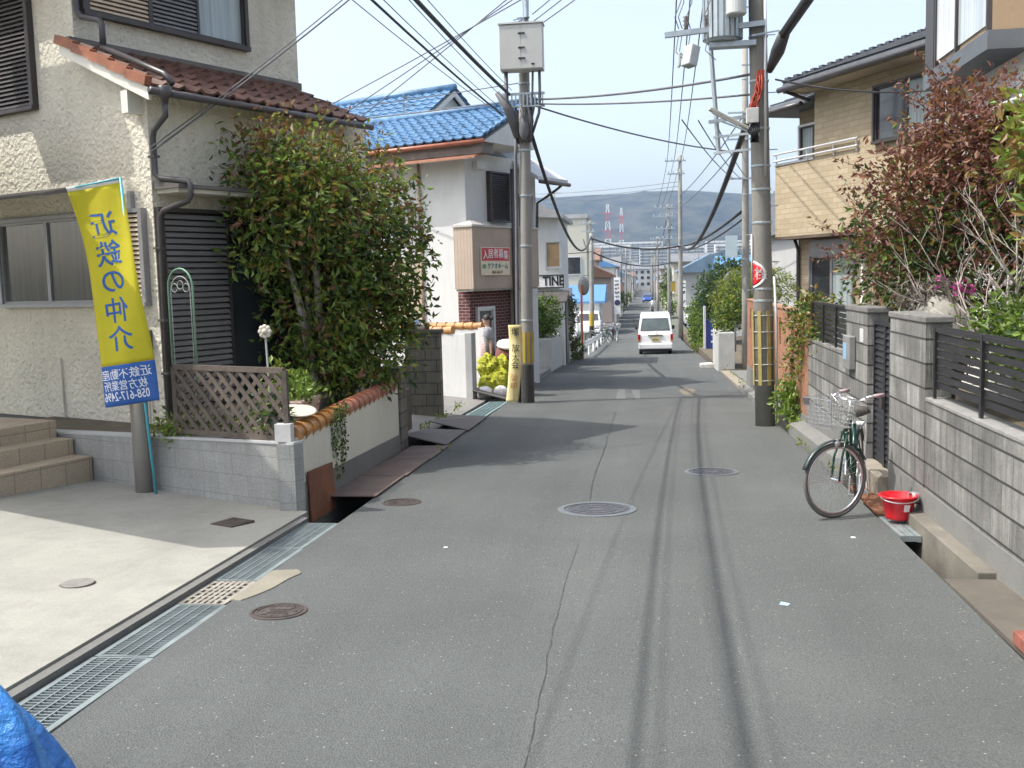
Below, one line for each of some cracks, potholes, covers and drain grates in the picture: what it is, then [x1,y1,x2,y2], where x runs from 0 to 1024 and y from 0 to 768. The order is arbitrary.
drain grate [467,402,508,418]
drain grate [18,657,153,734]
manhole cover [382,498,421,506]
manhole cover [249,603,308,620]
drain grate [213,548,302,581]
drain grate [94,604,227,658]
drain grate [266,523,338,549]
manhole cover [684,467,739,476]
drain grate [878,516,922,542]
drain grate [176,581,256,605]
manhole cover [557,502,637,517]
